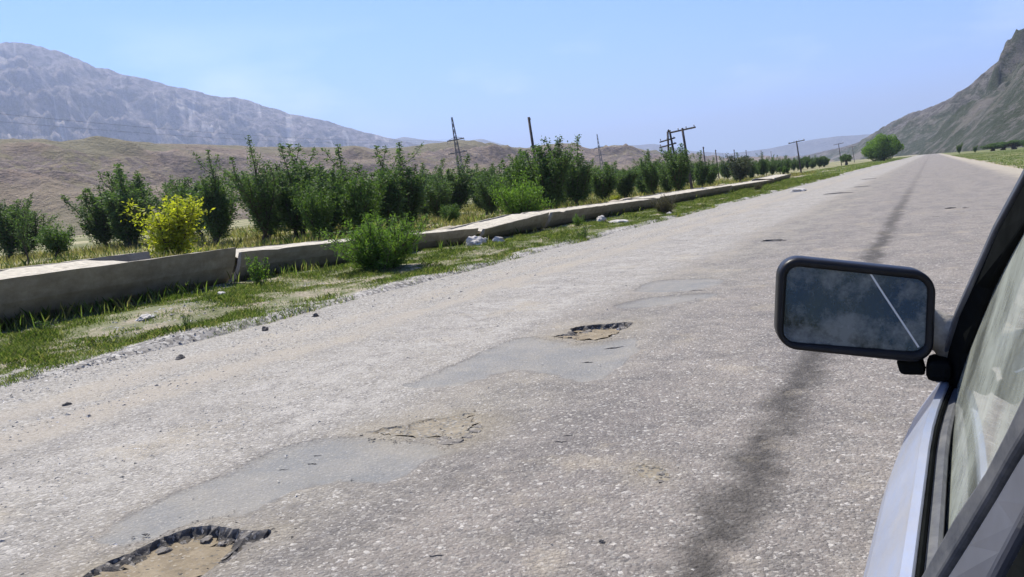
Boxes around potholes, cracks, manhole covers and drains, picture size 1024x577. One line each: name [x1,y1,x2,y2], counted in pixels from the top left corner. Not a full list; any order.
pothole [82,525,271,577]
pothole [552,322,634,340]
pothole [367,413,483,445]
